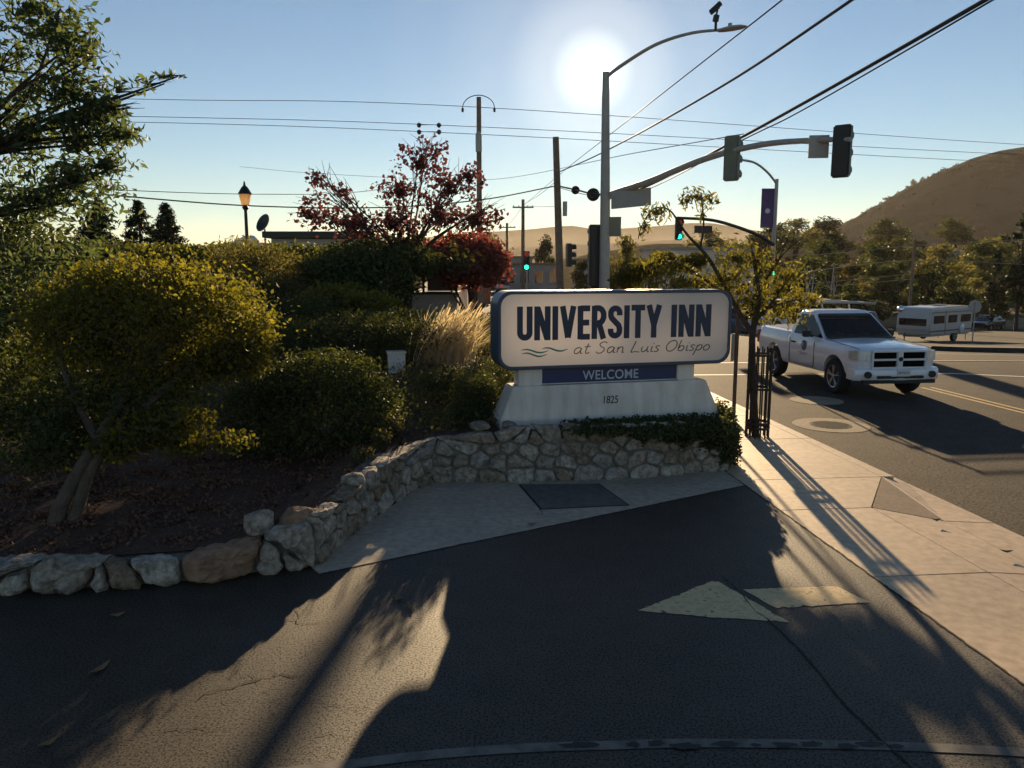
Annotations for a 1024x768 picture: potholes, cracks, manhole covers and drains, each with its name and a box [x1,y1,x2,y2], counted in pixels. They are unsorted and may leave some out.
manhole cover [792,418,871,433]
utility cover [518,484,630,510]
crack [140,670,365,754]
